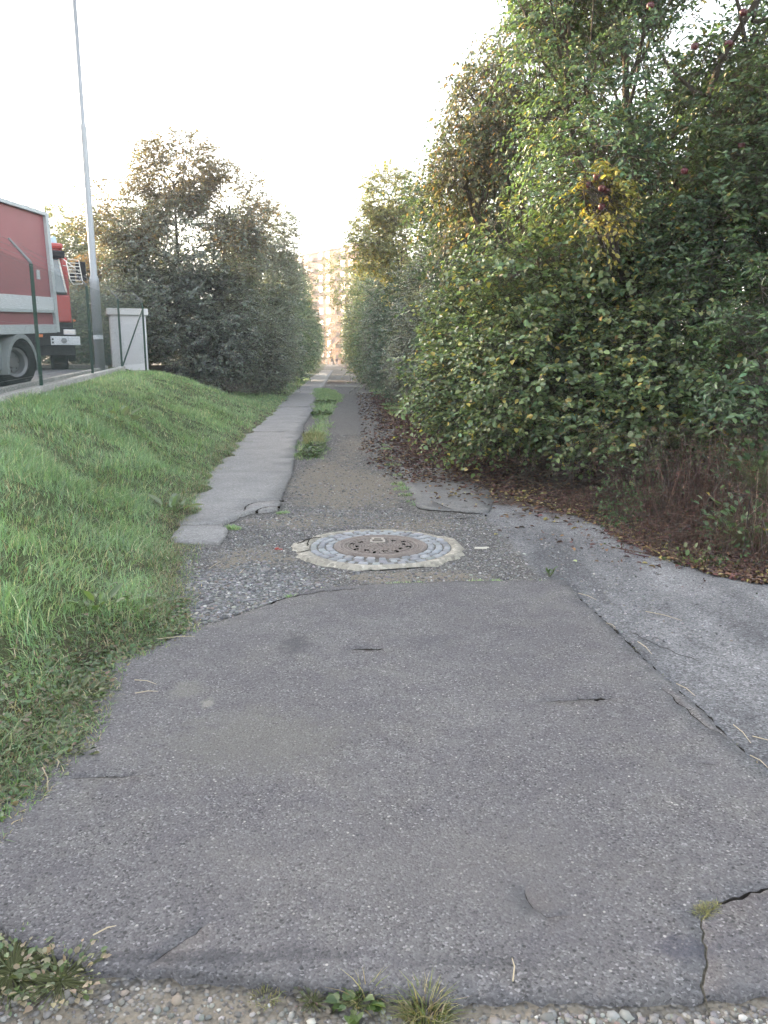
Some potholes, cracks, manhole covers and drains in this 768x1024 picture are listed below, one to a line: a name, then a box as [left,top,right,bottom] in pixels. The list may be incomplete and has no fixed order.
crack [699,888,768,1016]
manhole cover [291,529,465,571]
